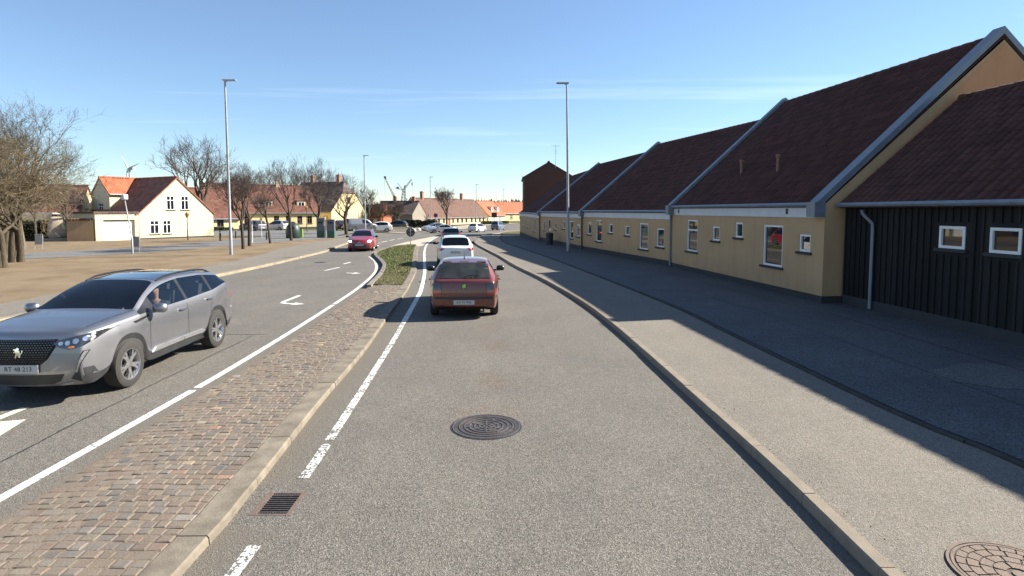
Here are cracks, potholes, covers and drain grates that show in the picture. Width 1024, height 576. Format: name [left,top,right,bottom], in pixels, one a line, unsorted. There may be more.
drain grate [249,492,307,516]
manhole cover [945,541,1024,576]
manhole cover [451,414,522,440]
